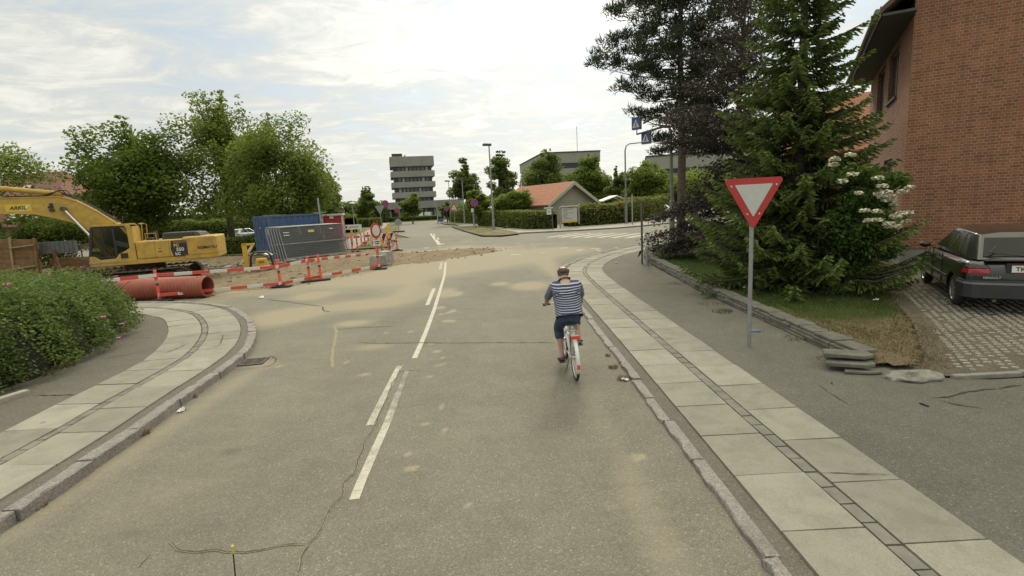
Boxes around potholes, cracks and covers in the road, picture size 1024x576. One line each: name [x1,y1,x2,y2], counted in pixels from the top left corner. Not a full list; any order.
crack [168,299,554,571]
drain grate [237,357,270,367]
crack [933,385,1020,412]
